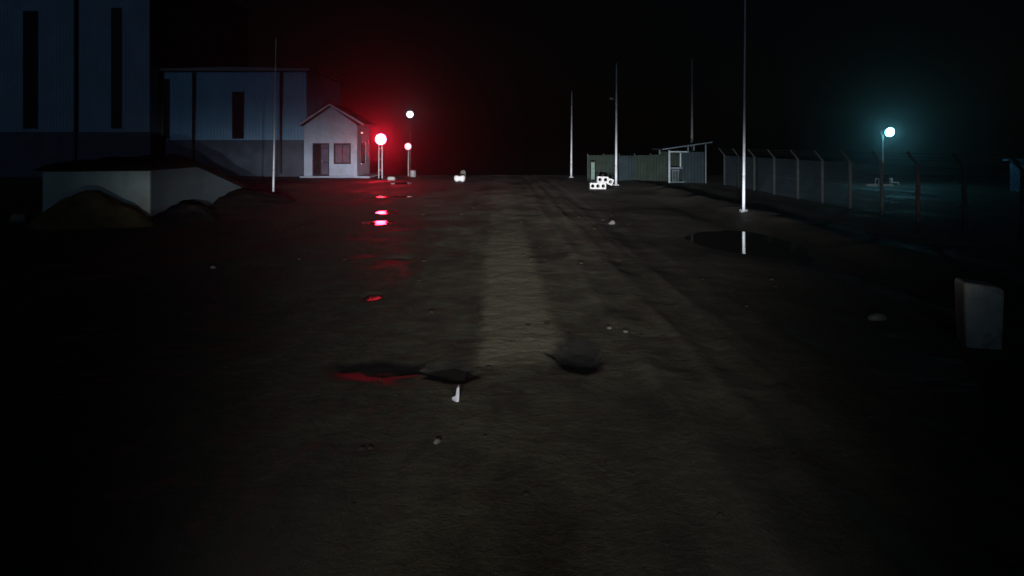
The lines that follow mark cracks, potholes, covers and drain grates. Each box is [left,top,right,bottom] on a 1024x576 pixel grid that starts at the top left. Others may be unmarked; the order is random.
pothole [416,359,488,385]
pothole [314,353,442,387]
pothole [540,336,611,378]
